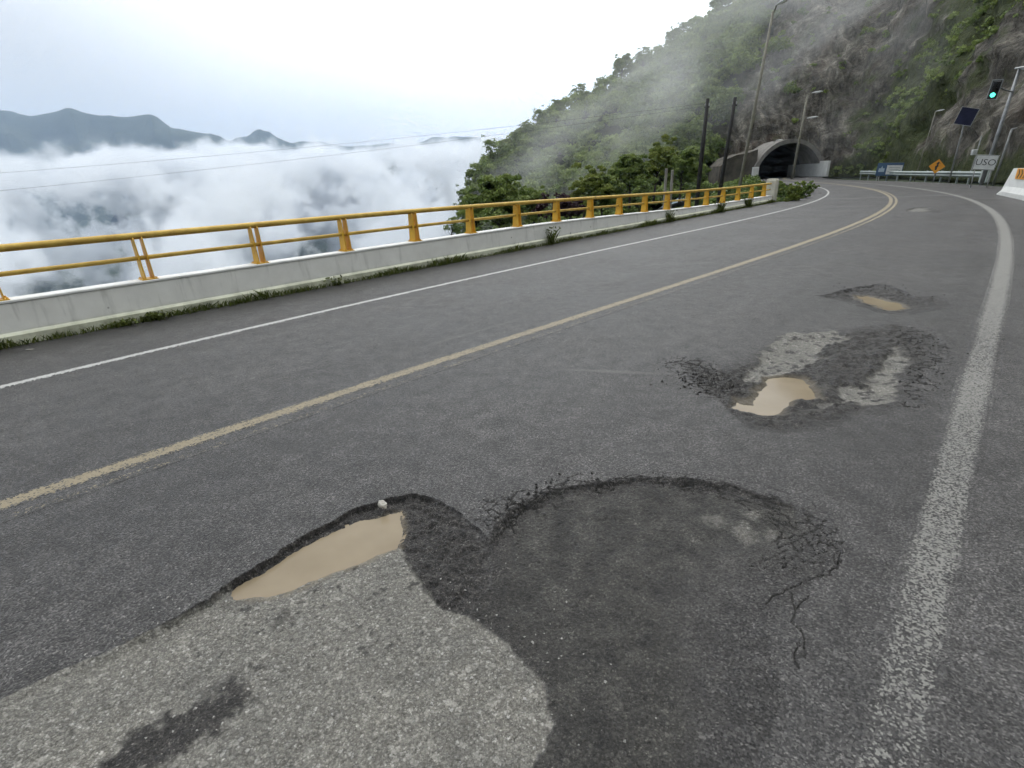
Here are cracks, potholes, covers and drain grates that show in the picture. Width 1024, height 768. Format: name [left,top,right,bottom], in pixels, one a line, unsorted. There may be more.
pothole [816,283,951,315]
pothole [0,493,555,768]
crack [479,471,844,669]
pothole [682,324,945,434]
